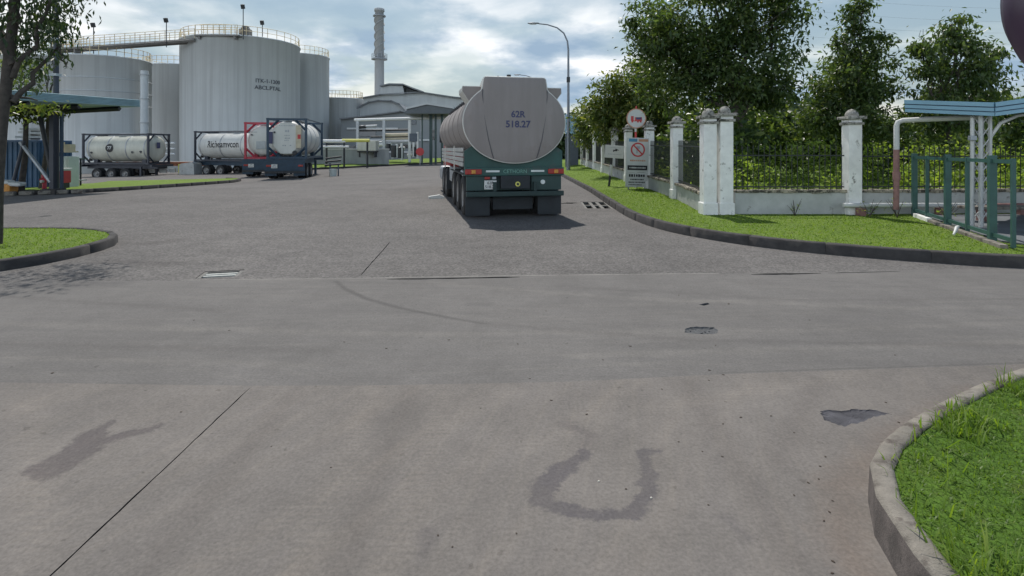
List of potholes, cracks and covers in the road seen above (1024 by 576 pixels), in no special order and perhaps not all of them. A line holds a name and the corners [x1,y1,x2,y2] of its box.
pothole [820,409,892,427]
drain grate [196,270,244,278]
